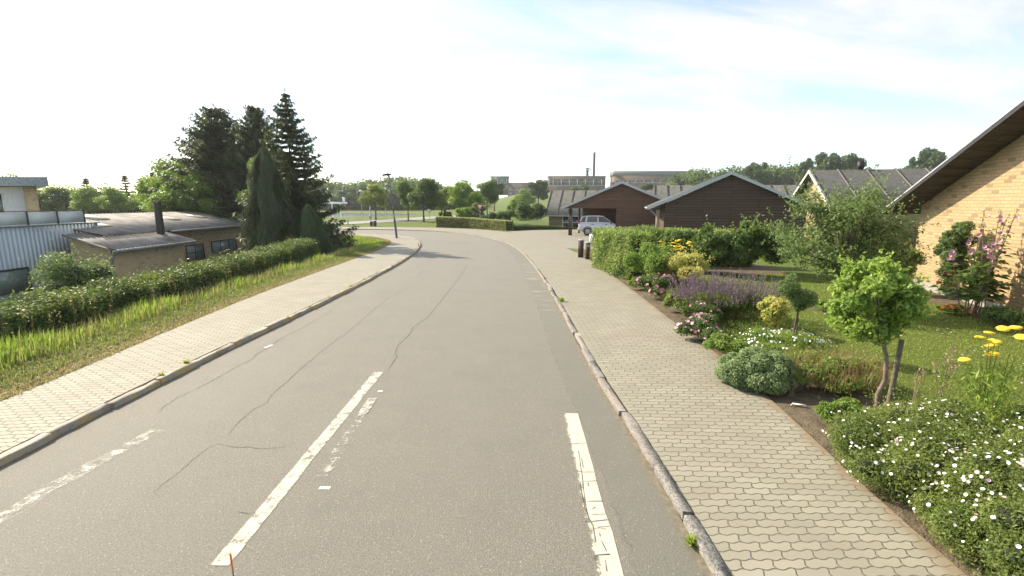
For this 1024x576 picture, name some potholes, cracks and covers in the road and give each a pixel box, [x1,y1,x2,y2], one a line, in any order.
crack [161,270,425,485]
